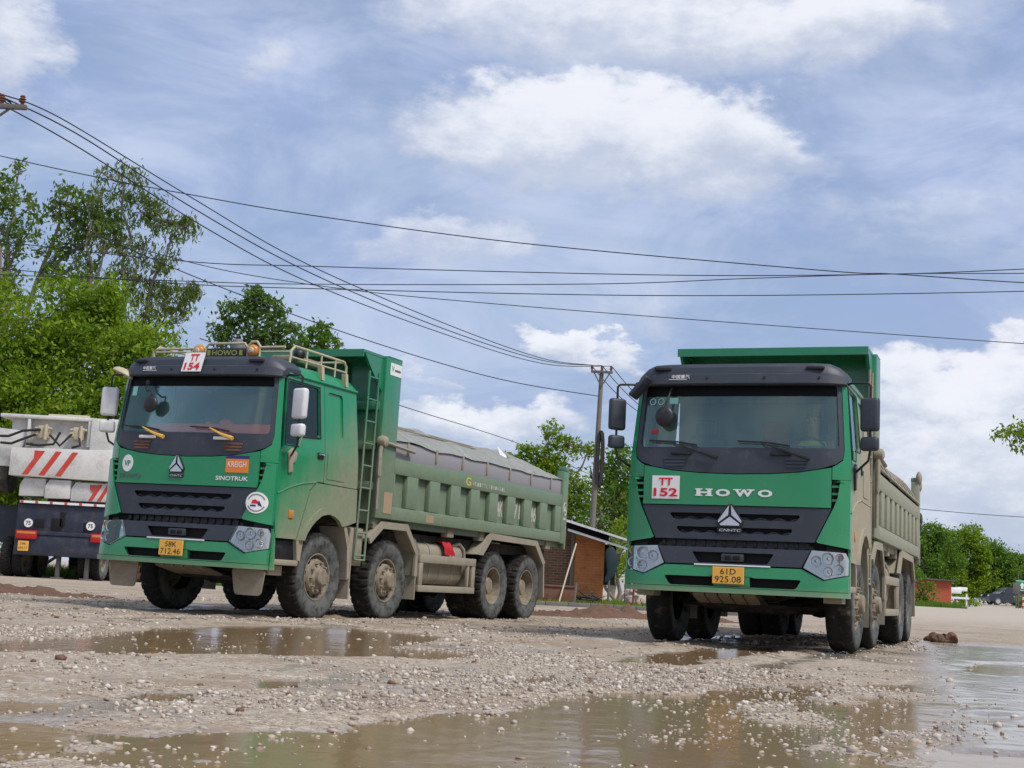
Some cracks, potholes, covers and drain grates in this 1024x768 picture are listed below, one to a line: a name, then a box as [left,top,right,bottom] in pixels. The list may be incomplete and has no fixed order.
pothole [0,678,1024,768]
pothole [592,645,800,665]
pothole [0,624,492,660]
